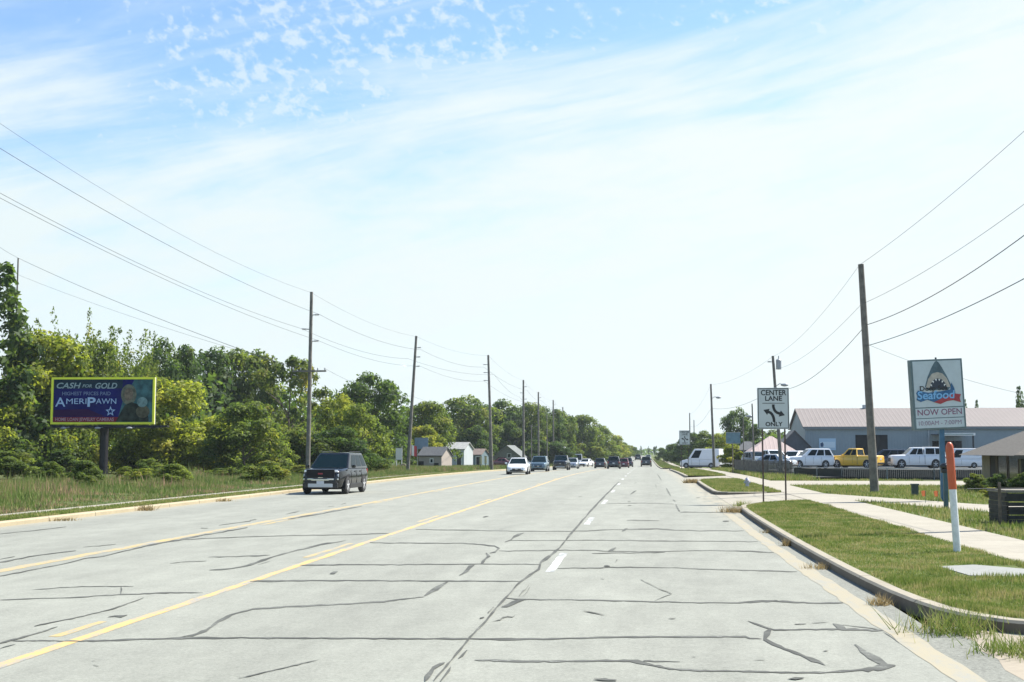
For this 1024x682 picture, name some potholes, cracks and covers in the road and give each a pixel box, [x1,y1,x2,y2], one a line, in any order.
crack [0,586,201,648]
crack [175,540,345,570]
